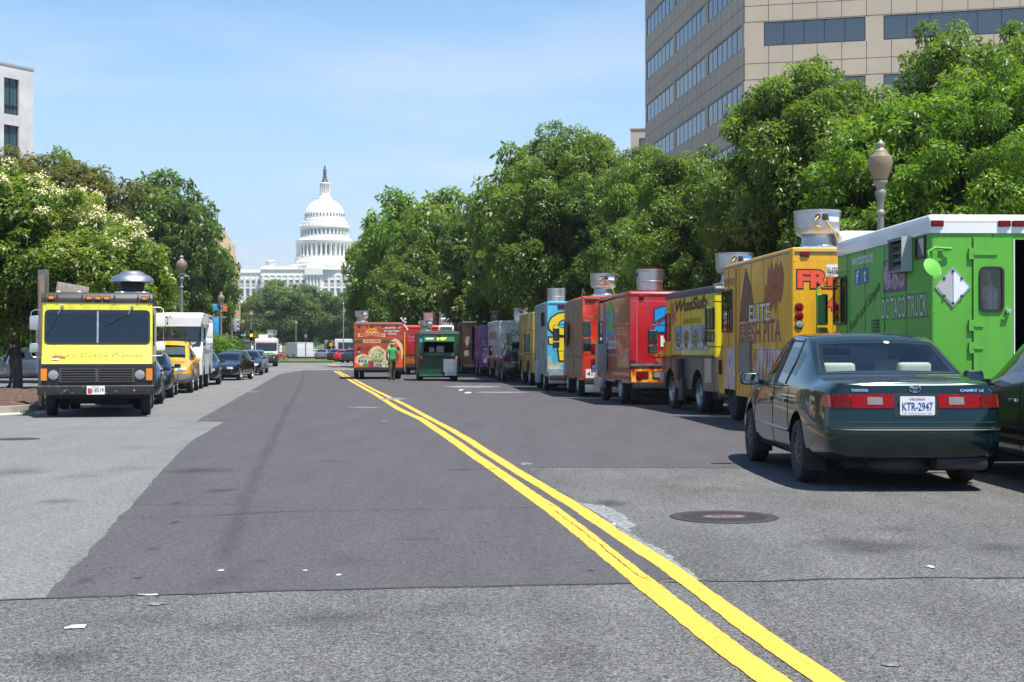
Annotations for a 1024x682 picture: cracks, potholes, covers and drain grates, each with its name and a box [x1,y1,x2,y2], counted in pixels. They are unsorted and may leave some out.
manhole cover [670,510,779,524]
